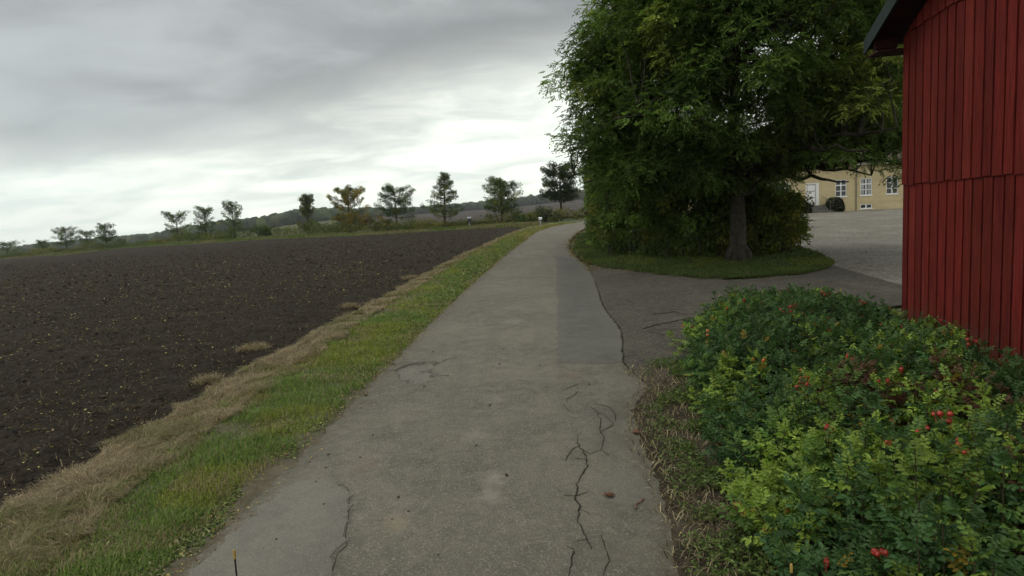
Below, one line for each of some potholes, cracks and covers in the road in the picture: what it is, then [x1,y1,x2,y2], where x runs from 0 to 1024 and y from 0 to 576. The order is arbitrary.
crack [643,311,694,335]
crack [563,384,616,576]
